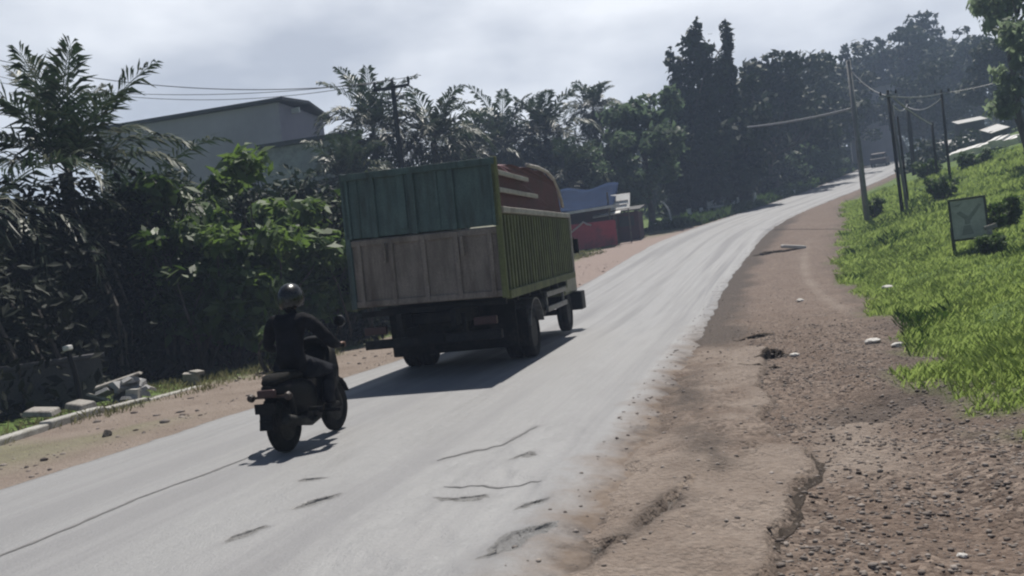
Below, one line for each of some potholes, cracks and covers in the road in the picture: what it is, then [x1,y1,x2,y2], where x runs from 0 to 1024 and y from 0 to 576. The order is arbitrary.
pothole [292,493,343,510]
pothole [475,521,560,560]
crack [437,426,537,461]
pothole [224,525,269,543]
pothole [513,497,551,511]
pothole [434,494,490,502]
